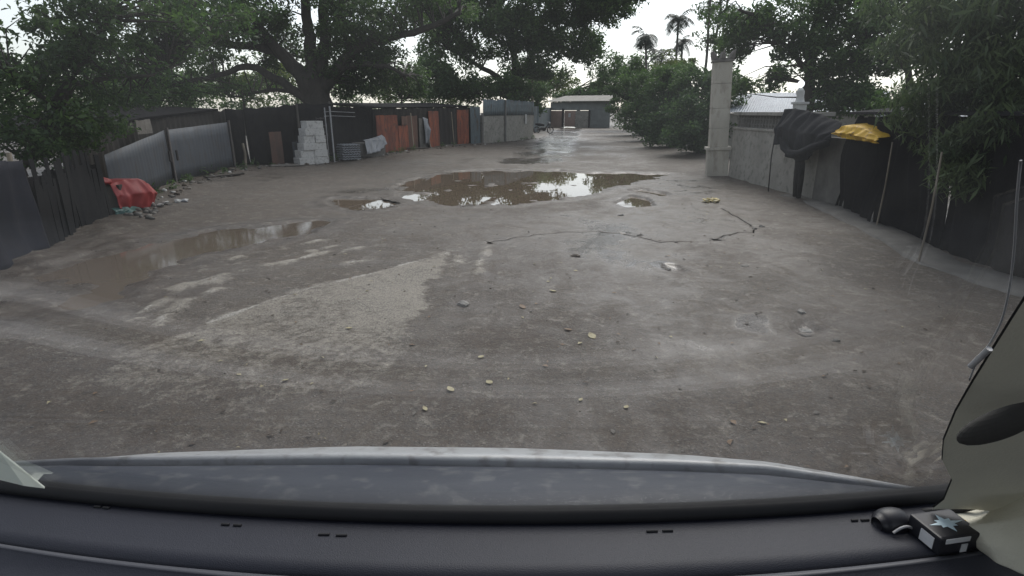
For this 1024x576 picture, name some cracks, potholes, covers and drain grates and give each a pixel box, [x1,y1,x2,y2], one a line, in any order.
crack [485,208,773,245]
pothole [380,168,683,208]
pothole [314,195,411,212]
